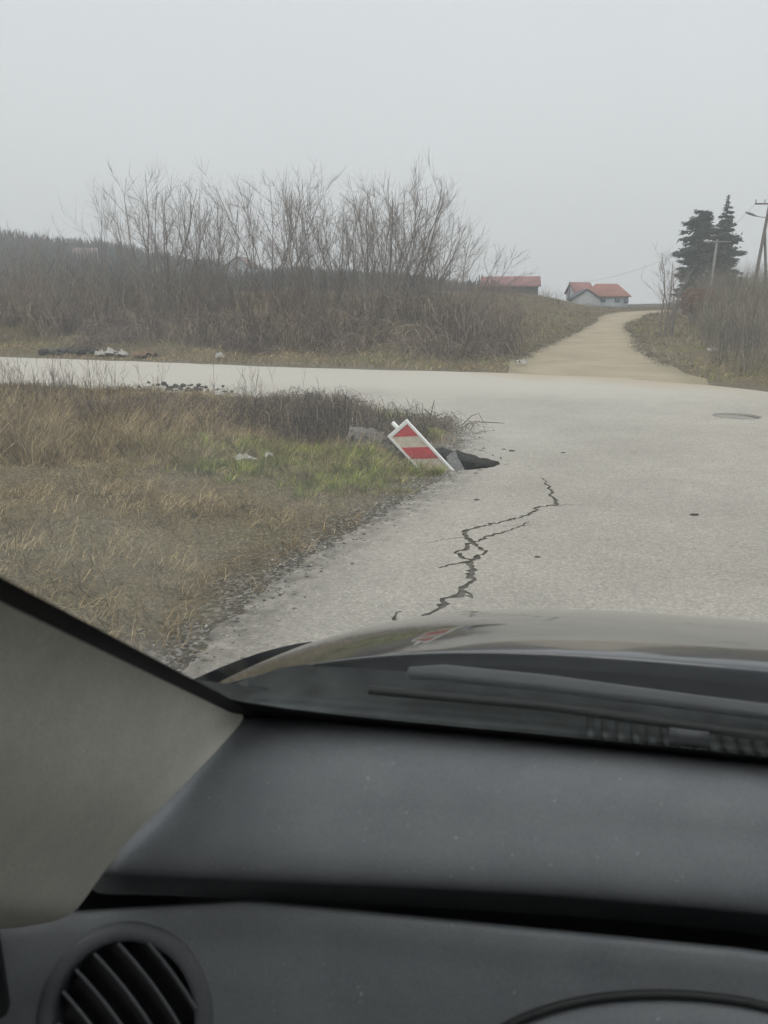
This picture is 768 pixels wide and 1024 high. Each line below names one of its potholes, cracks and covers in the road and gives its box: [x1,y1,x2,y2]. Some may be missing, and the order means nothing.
crack [391,477,591,621]
pothole [404,448,500,470]
